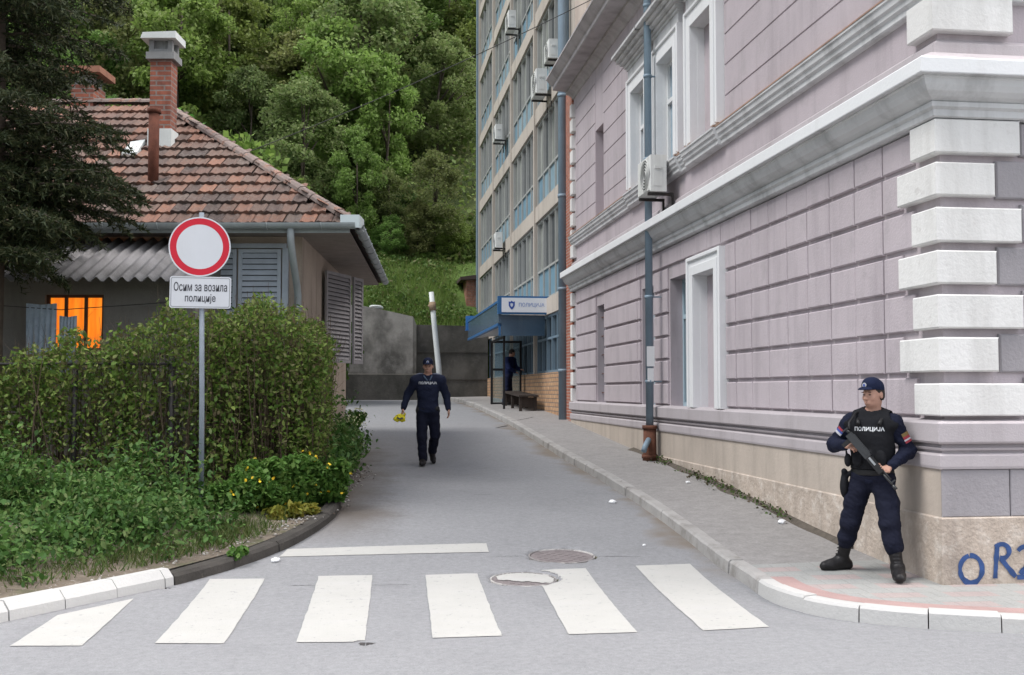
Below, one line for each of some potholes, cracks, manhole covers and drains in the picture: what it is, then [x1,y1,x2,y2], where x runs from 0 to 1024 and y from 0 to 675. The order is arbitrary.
manhole cover [528,549,595,564]
manhole cover [490,572,557,587]
